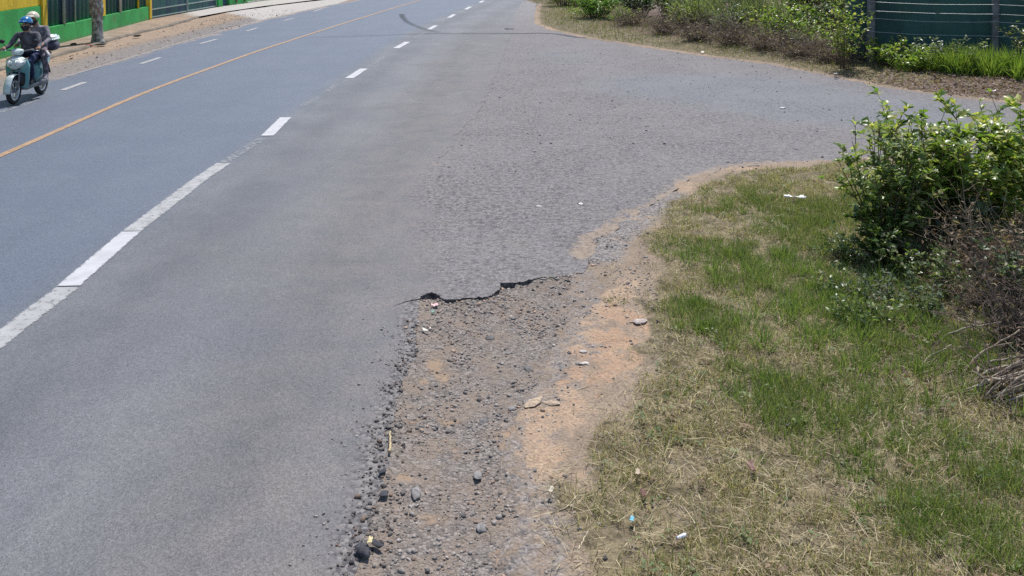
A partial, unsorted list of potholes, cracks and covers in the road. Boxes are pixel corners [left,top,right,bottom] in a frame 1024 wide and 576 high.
pothole [354,274,573,576]
